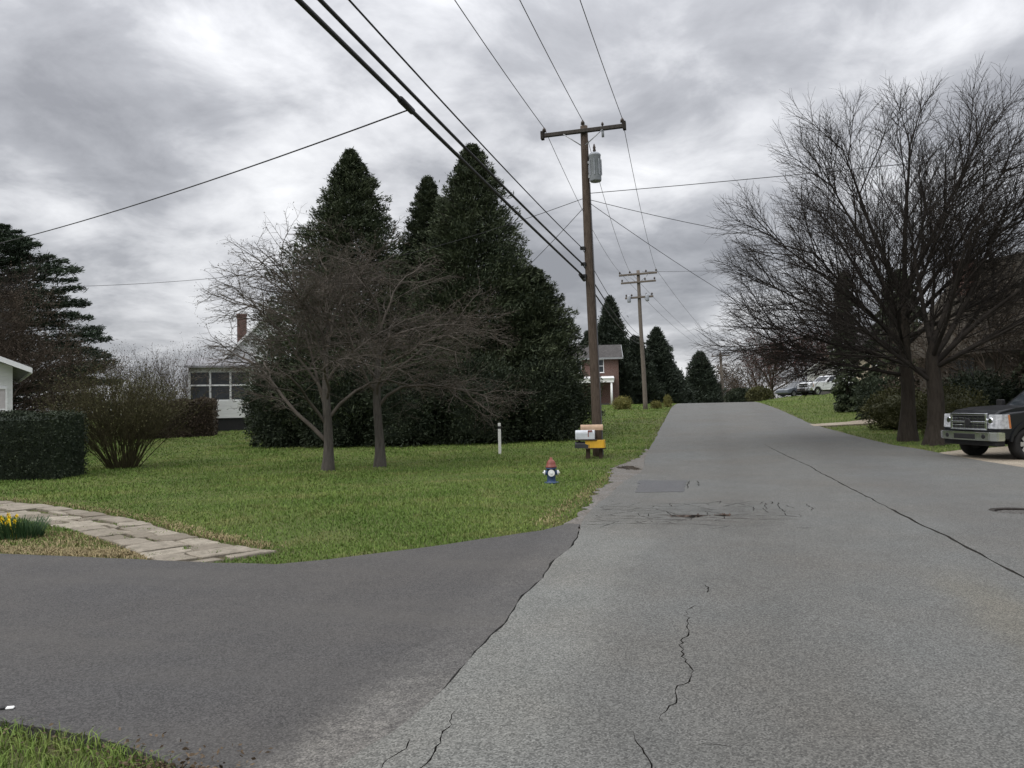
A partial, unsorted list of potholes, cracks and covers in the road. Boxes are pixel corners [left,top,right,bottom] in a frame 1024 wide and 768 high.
crack [382,692,469,768]
crack [578,481,801,529]
crack [659,586,709,719]
